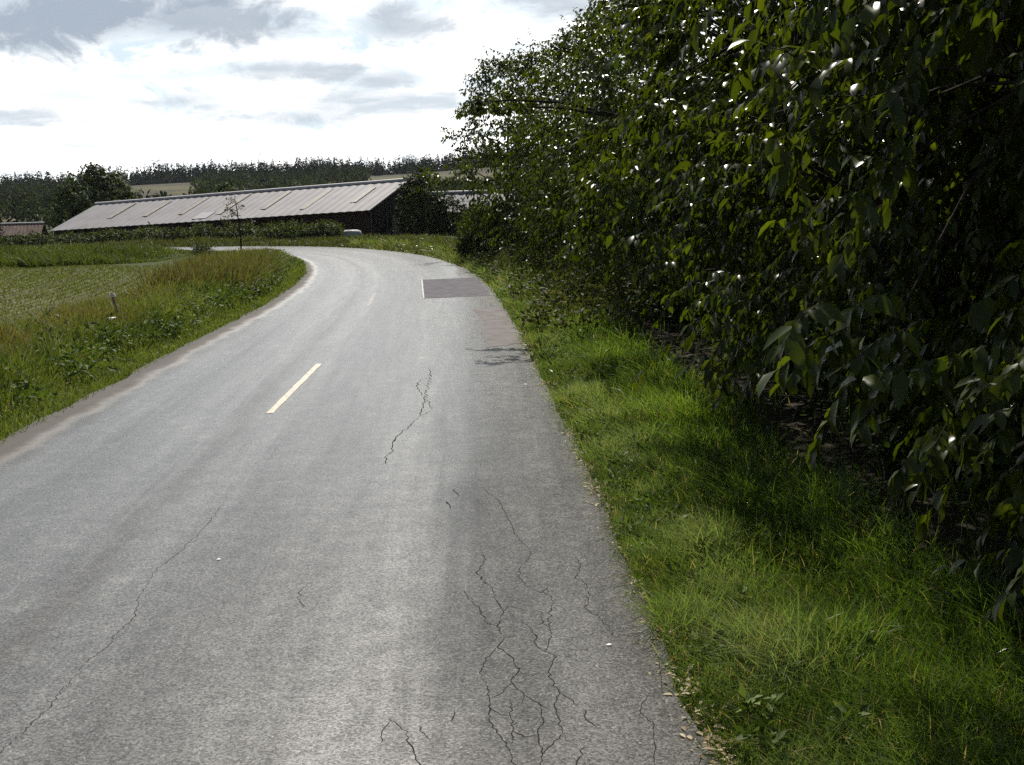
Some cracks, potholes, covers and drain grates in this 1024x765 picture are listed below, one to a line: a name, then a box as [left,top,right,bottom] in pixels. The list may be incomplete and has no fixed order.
crack [380,716,430,765]
crack [464,489,599,765]
crack [575,560,613,638]
crack [384,368,433,464]
crack [640,663,663,765]
